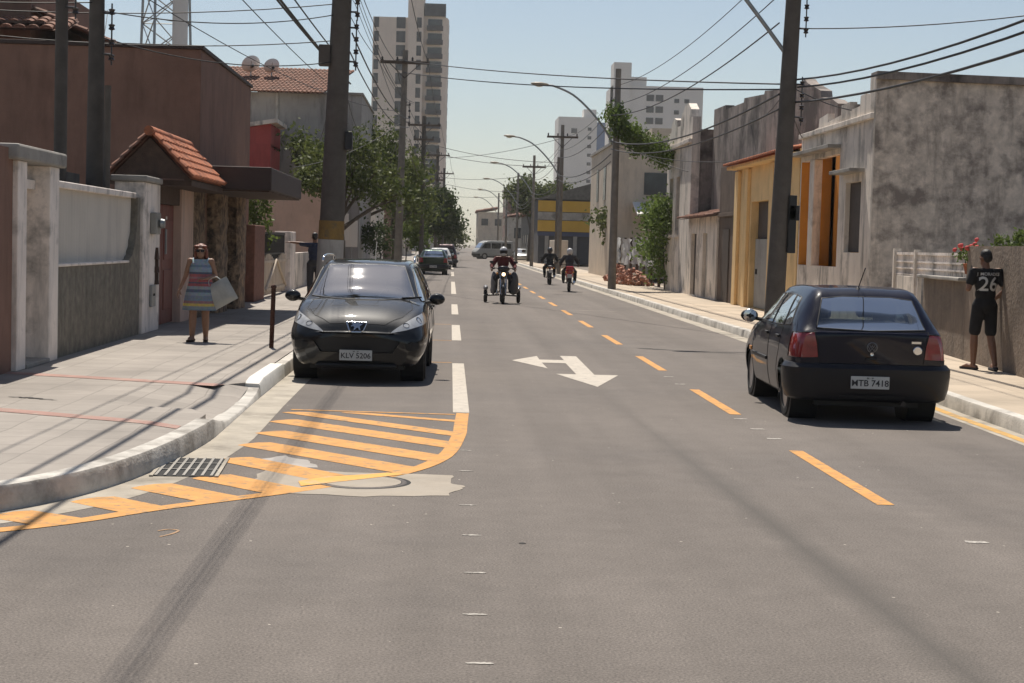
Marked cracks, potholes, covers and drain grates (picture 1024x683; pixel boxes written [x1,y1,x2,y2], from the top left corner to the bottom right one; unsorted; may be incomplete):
drain grate [149,457,230,477]
manhole cover [319,475,411,489]
